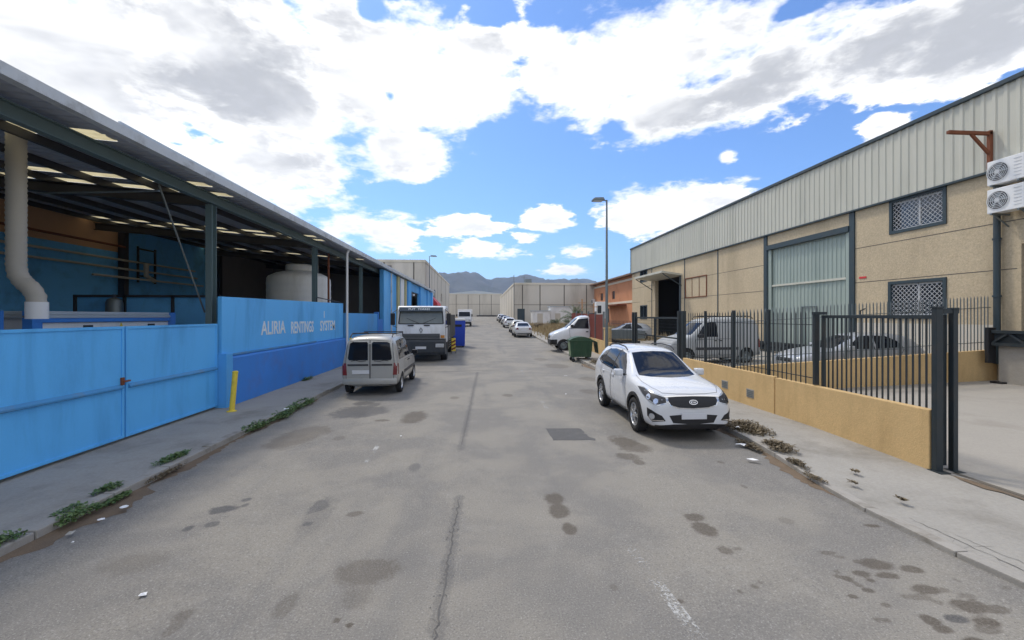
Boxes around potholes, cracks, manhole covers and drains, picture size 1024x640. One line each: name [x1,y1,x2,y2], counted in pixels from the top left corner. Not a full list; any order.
crack [430,498,460,640]
crack [914,520,1024,571]
